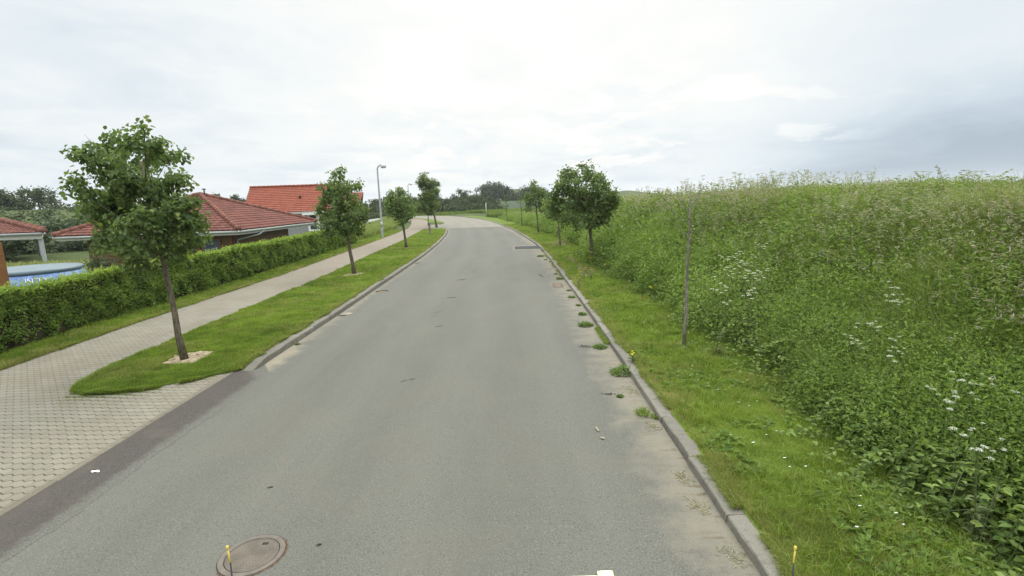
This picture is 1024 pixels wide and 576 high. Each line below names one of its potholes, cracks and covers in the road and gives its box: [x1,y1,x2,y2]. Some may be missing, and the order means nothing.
manhole cover [216,534,288,576]
